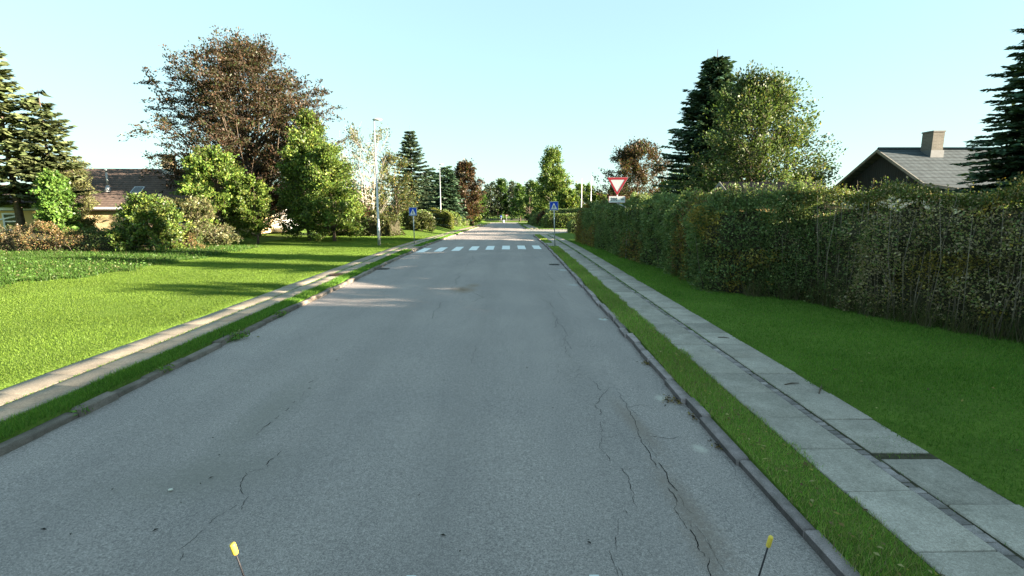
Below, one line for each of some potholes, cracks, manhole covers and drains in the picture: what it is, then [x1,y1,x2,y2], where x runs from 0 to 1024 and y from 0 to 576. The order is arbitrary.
crack [595,385,721,576]
crack [180,452,280,560]
